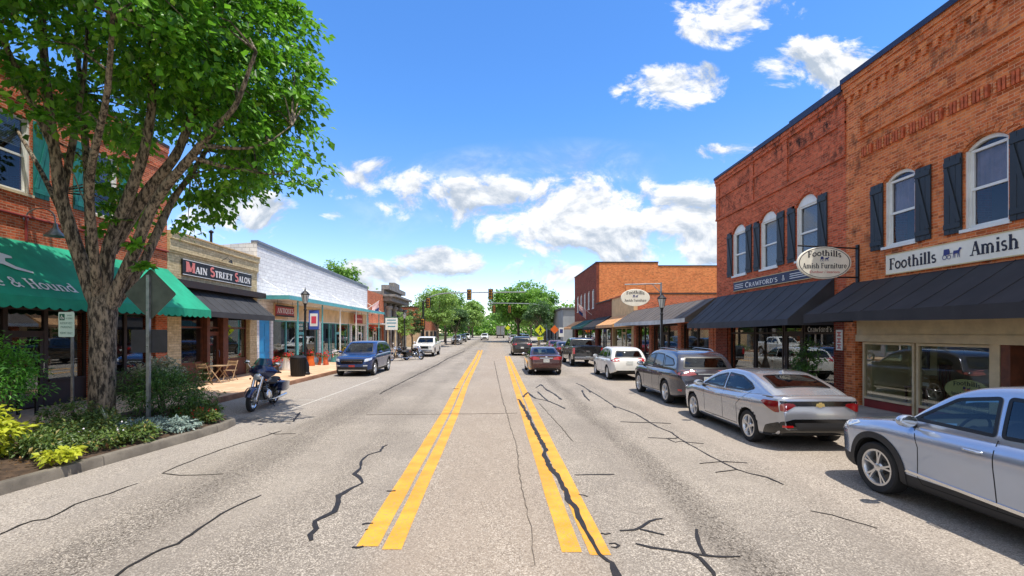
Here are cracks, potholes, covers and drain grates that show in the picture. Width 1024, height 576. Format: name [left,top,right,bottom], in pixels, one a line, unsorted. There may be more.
crack [379,361,784,563]
crack [162,412,301,476]
crack [811,510,877,529]
crack [380,351,464,394]
